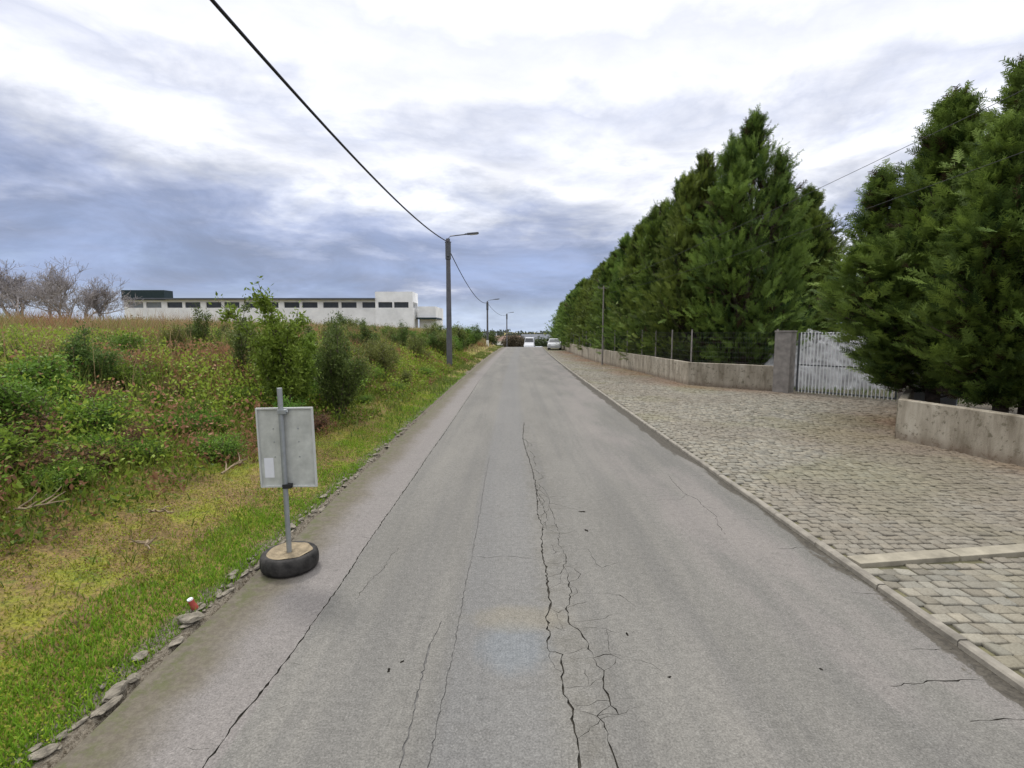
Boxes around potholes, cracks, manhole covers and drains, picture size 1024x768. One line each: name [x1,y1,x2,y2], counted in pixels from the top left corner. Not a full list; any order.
crack [474,425,657,768]
crack [890,679,974,687]
